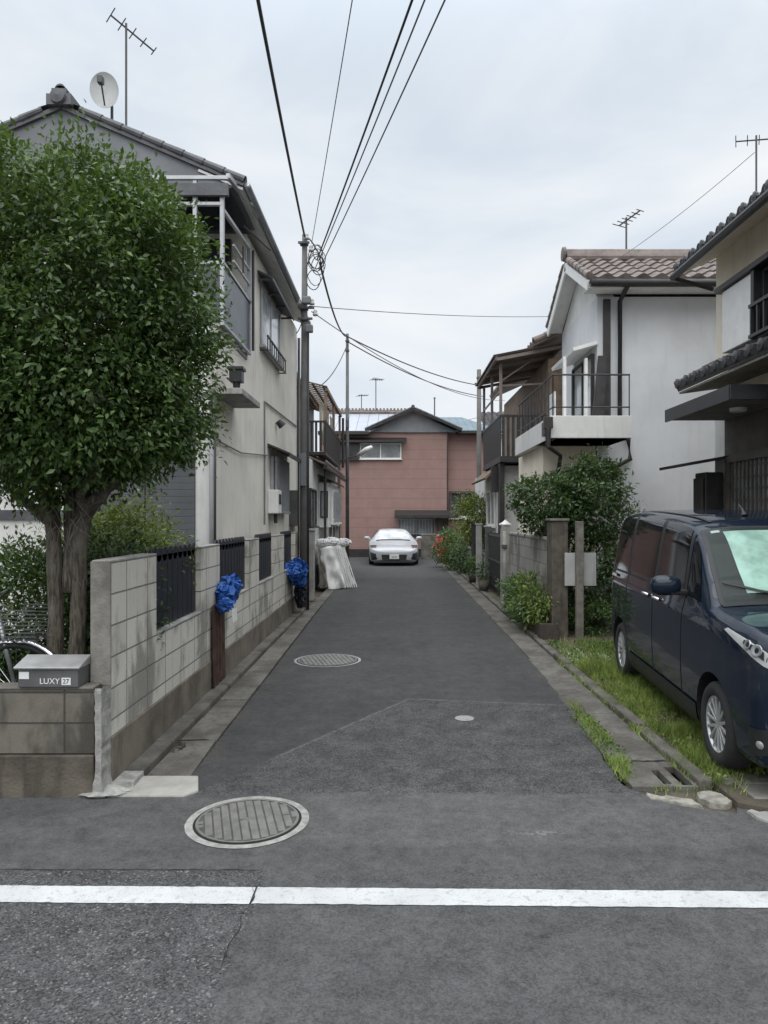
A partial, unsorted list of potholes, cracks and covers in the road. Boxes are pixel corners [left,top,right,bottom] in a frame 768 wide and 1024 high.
manhole cover [294,654,361,667]
manhole cover [184,796,309,849]
crack [221,887,261,967]
